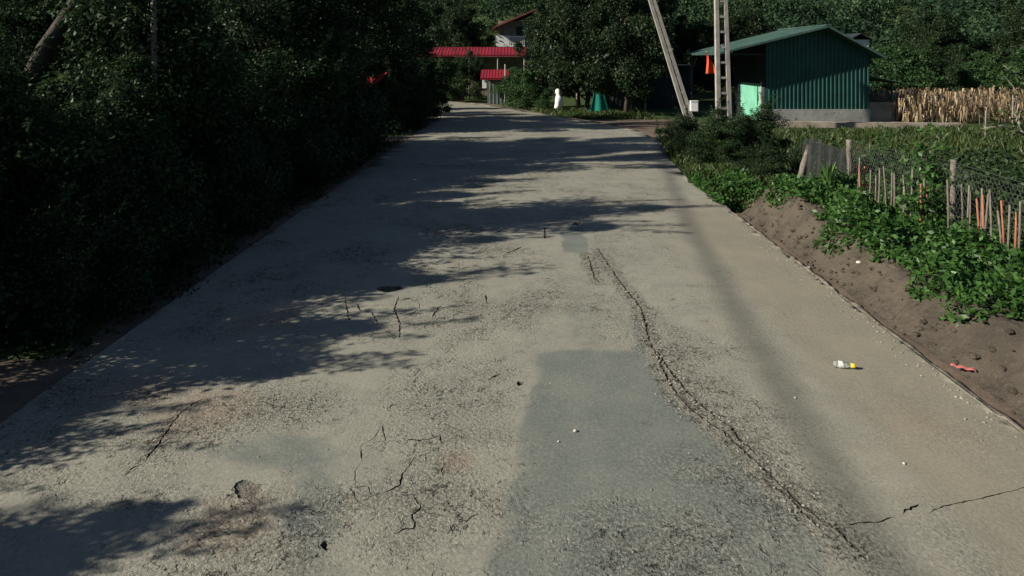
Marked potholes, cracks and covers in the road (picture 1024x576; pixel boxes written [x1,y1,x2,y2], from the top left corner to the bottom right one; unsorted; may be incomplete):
crack [124,398,204,476]
crack [350,424,478,534]
pothole [234,479,267,504]
crack [344,297,441,337]
crack [588,250,1024,552]
